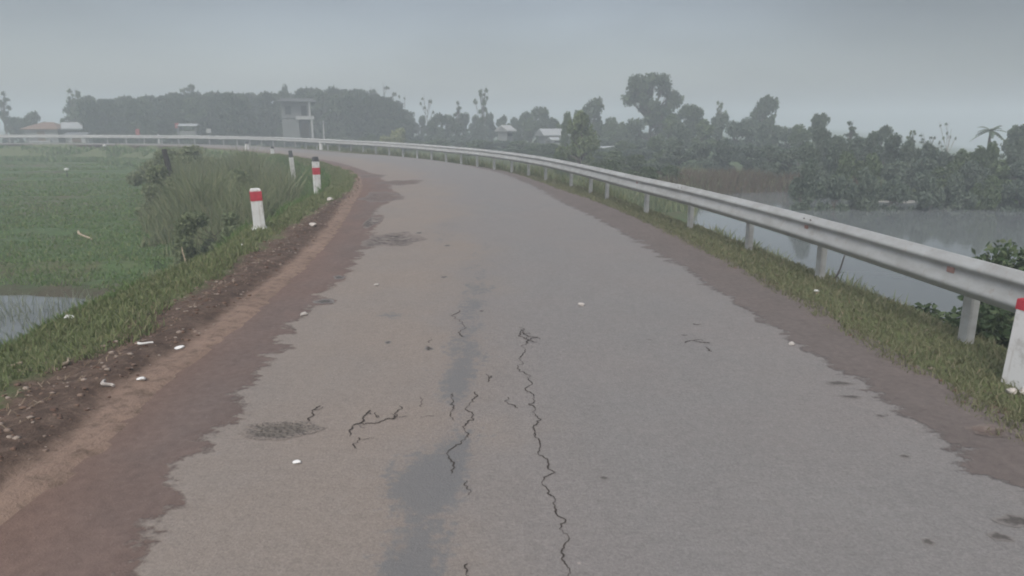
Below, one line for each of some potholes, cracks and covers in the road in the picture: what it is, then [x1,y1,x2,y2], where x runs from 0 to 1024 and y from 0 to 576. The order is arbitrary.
crack [446,374,491,495]
crack [504,327,571,576]
crack [348,397,431,448]
pothole [238,421,327,441]
